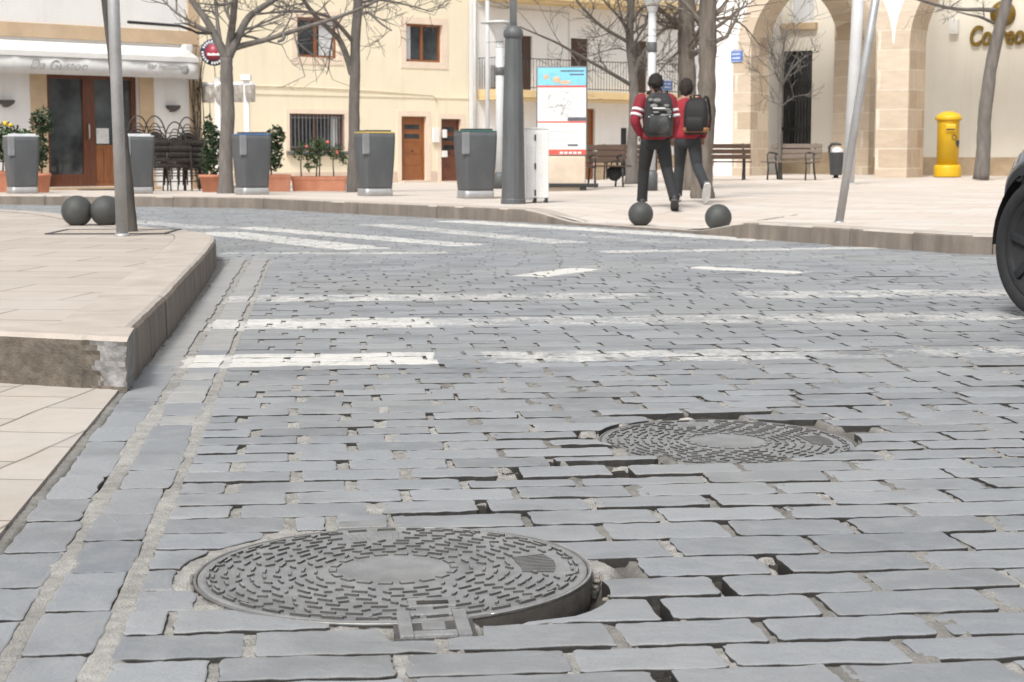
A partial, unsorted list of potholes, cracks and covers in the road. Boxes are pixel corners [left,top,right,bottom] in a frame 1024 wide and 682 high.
manhole cover [598,419,857,464]
manhole cover [193,520,592,641]
